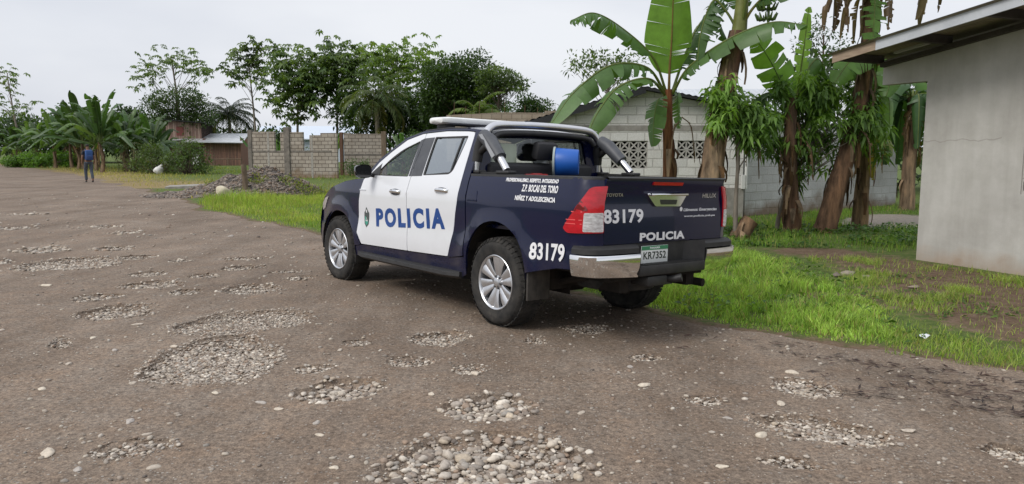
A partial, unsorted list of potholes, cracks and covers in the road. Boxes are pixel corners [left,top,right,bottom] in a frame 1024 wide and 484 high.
pothole [976,442,1024,466]
pothole [0,255,125,272]
pothole [769,376,849,400]
pothole [214,282,288,295]
pothole [356,428,604,484]
pothole [159,307,320,339]
pothole [115,279,188,289]
pothole [288,375,388,405]
pothole [407,328,475,347]
pothole [743,411,909,450]
pothole [436,390,541,424]
pothole [127,330,292,389]
